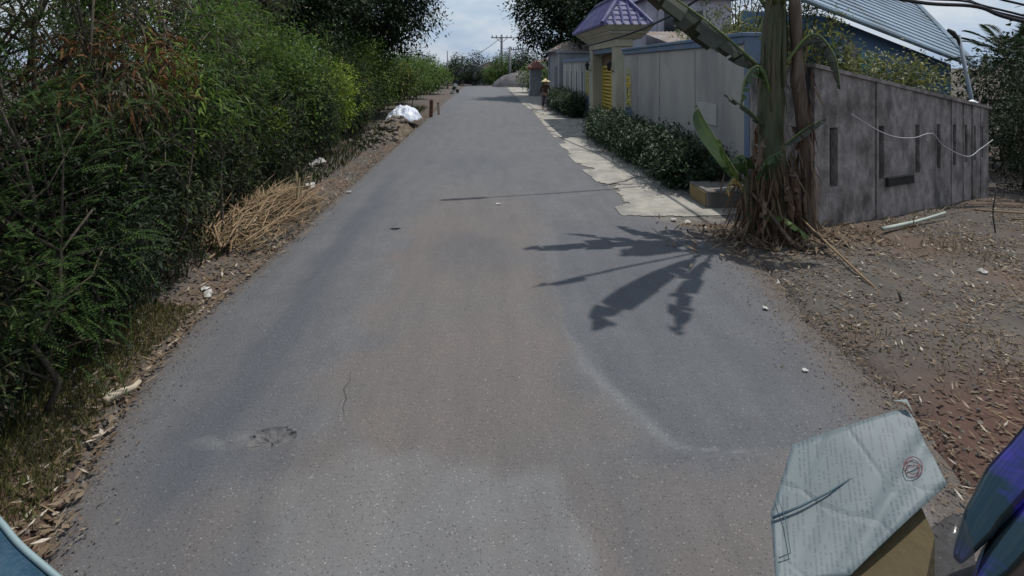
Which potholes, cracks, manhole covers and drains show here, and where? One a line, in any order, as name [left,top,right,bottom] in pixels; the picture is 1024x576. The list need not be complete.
pothole [238,423,302,455]
